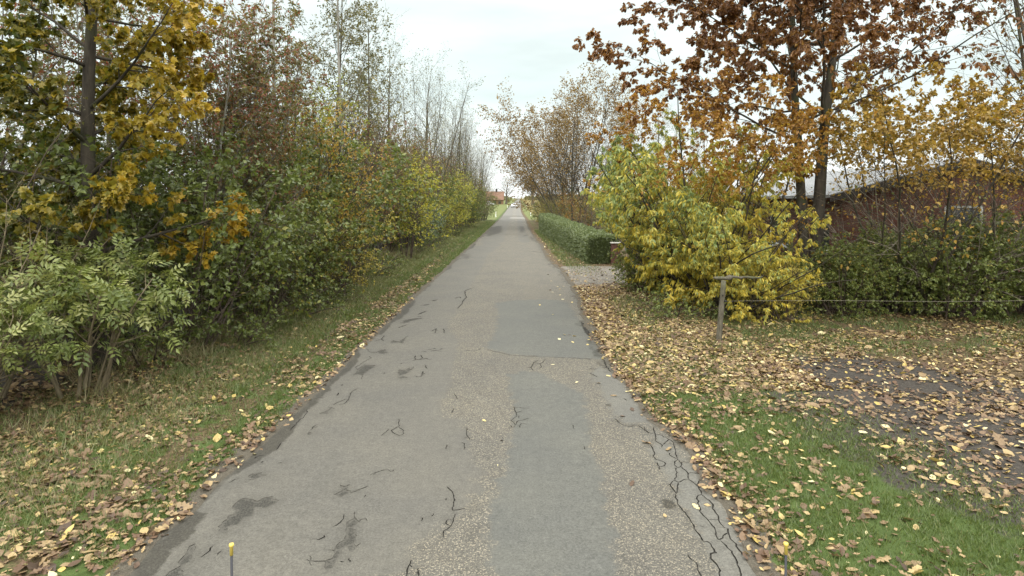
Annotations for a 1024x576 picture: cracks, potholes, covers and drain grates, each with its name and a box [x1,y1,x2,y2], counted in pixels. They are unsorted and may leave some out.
crack [495,351,611,377]
crack [617,420,742,576]
crack [421,487,465,538]
